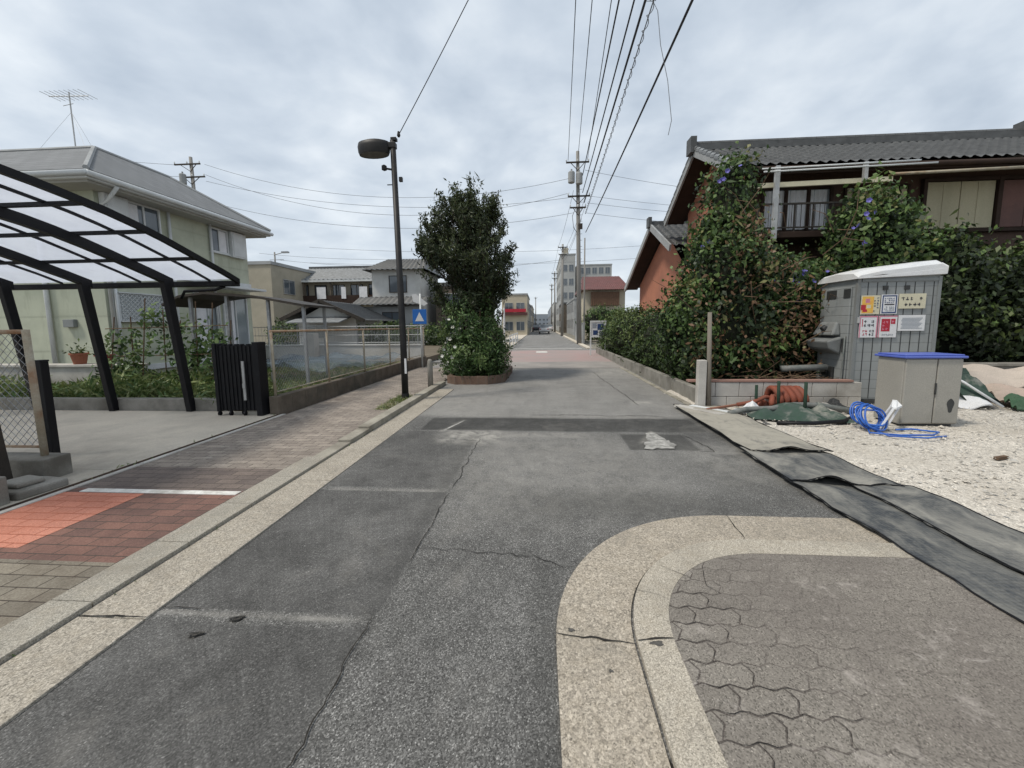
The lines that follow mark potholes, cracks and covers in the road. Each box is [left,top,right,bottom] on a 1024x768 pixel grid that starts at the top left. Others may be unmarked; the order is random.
crack [430,547,572,567]
